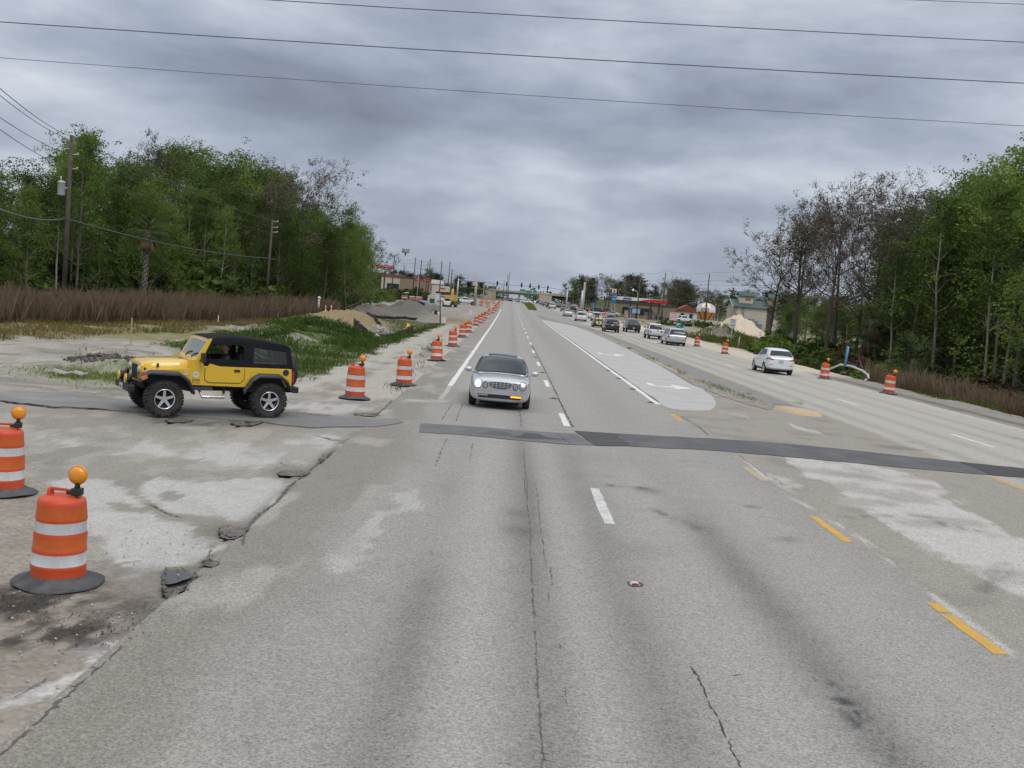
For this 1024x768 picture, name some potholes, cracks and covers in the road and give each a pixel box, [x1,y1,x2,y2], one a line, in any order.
crack [523,448,567,768]
crack [241,435,335,545]
crack [0,645,122,755]
pothole [161,567,199,598]
crack [690,666,742,768]
